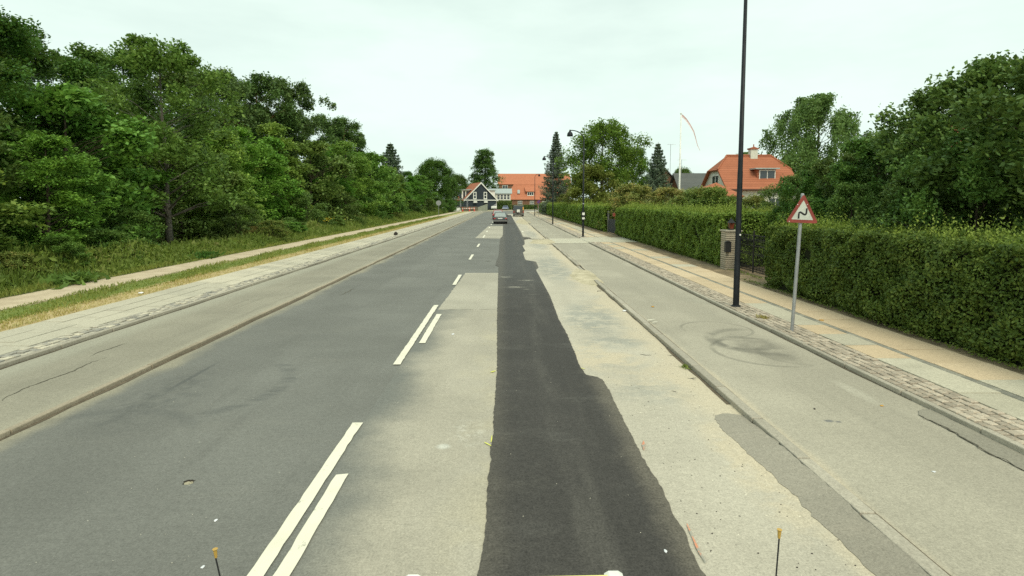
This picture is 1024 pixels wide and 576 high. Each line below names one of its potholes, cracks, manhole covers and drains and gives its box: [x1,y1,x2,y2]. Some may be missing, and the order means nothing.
crack [2,344,122,401]
